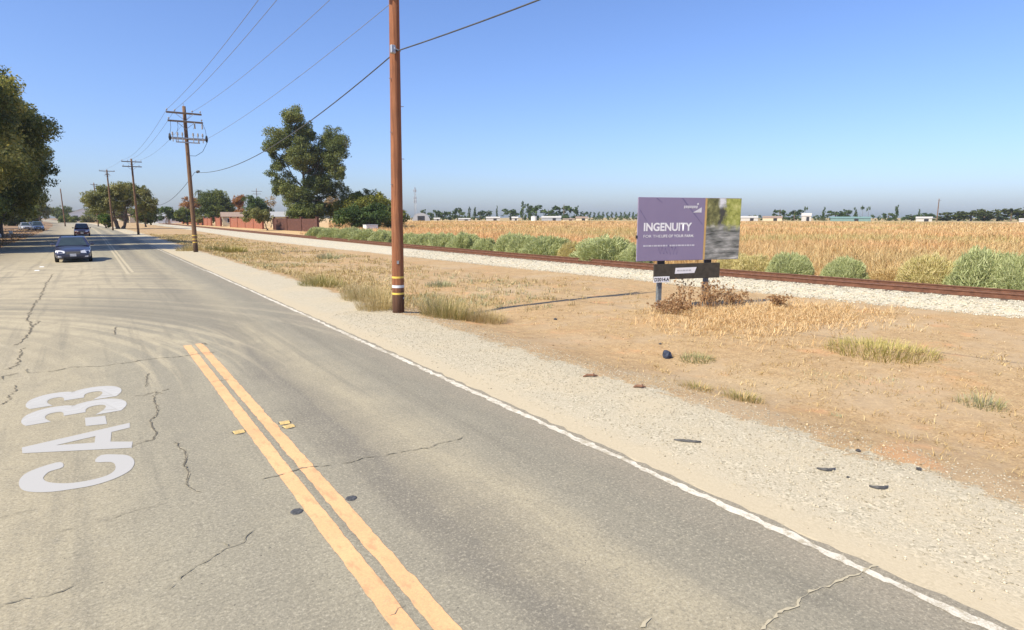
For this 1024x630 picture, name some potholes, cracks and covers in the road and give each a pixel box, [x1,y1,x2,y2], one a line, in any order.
crack [761,565,877,629]
crack [175,442,202,492]
crack [0,274,211,446]
crack [262,436,463,479]
crack [168,530,253,589]
